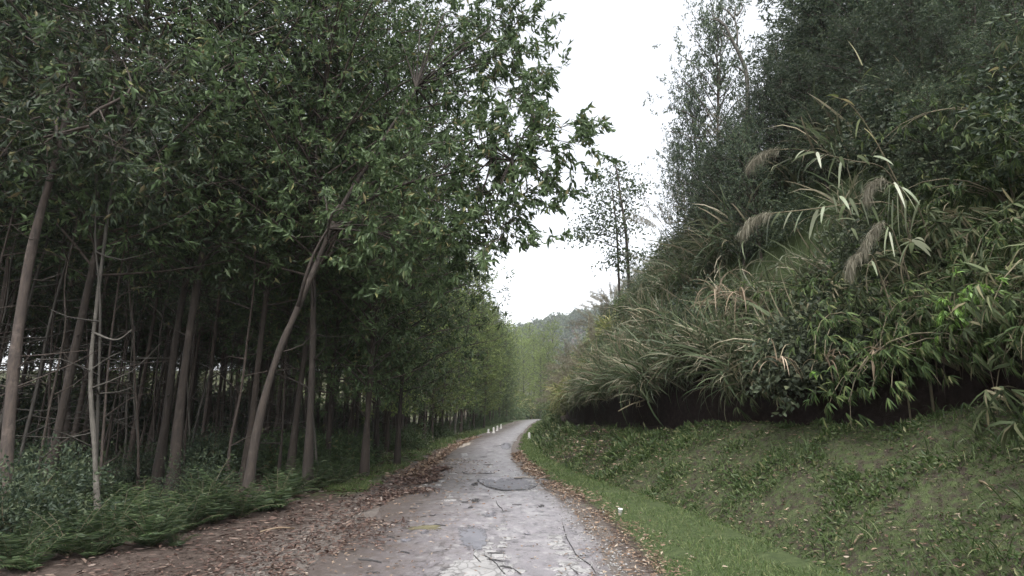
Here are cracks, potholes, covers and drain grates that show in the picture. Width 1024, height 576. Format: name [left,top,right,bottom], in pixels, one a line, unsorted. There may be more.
crack [473,552,521,575]
